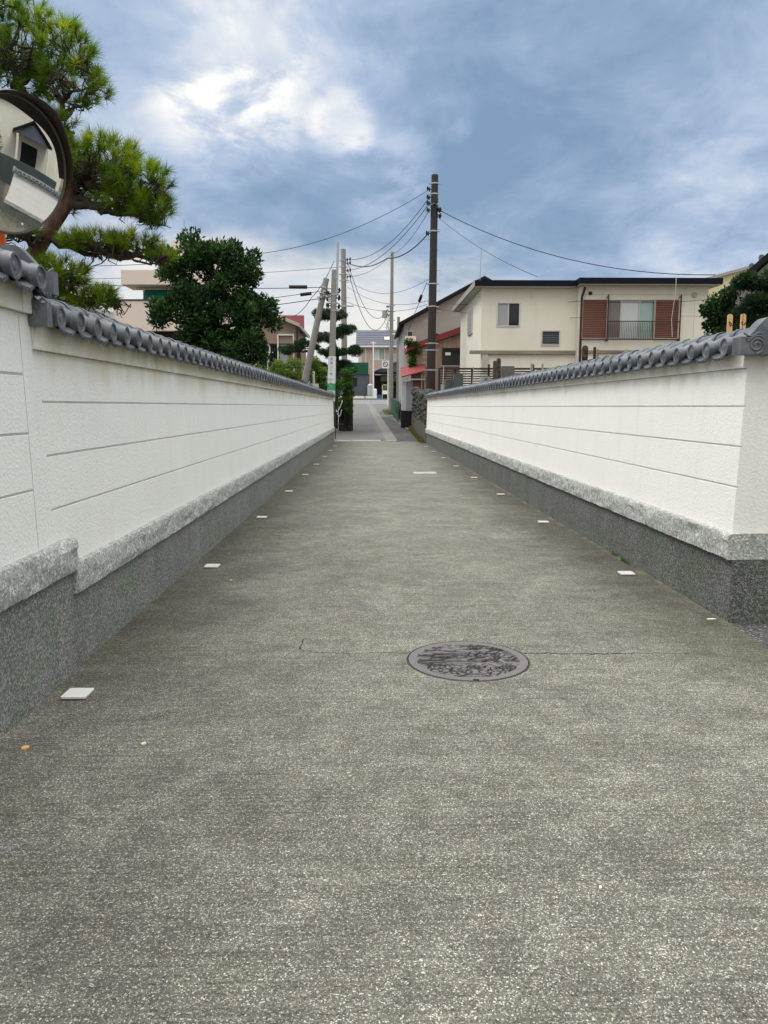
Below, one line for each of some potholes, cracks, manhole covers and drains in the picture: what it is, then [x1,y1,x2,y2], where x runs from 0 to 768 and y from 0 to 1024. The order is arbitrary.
manhole cover [407,641,530,682]
